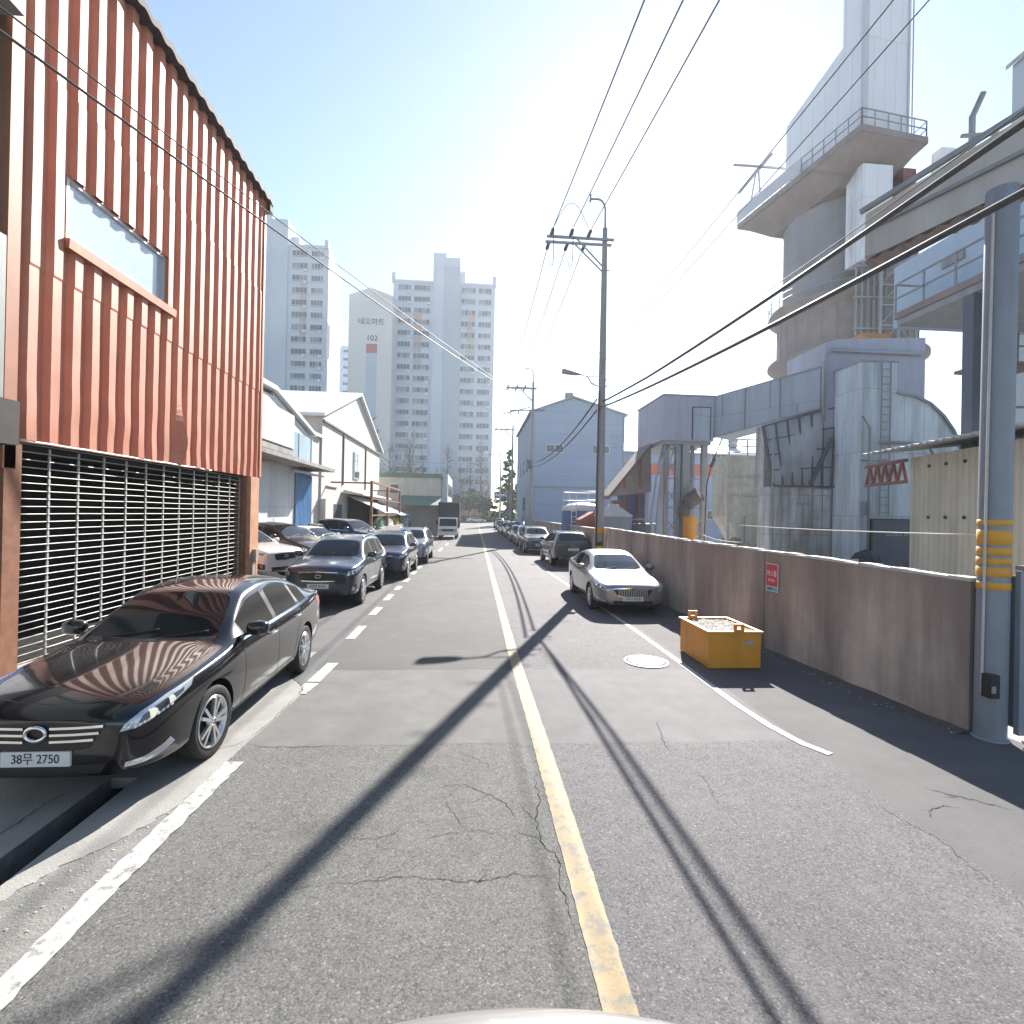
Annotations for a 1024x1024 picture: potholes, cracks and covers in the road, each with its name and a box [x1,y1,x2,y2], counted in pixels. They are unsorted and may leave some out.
crack [292,776,575,931]
crack [885,790,1012,889]
manhole cover [623,655,669,669]
